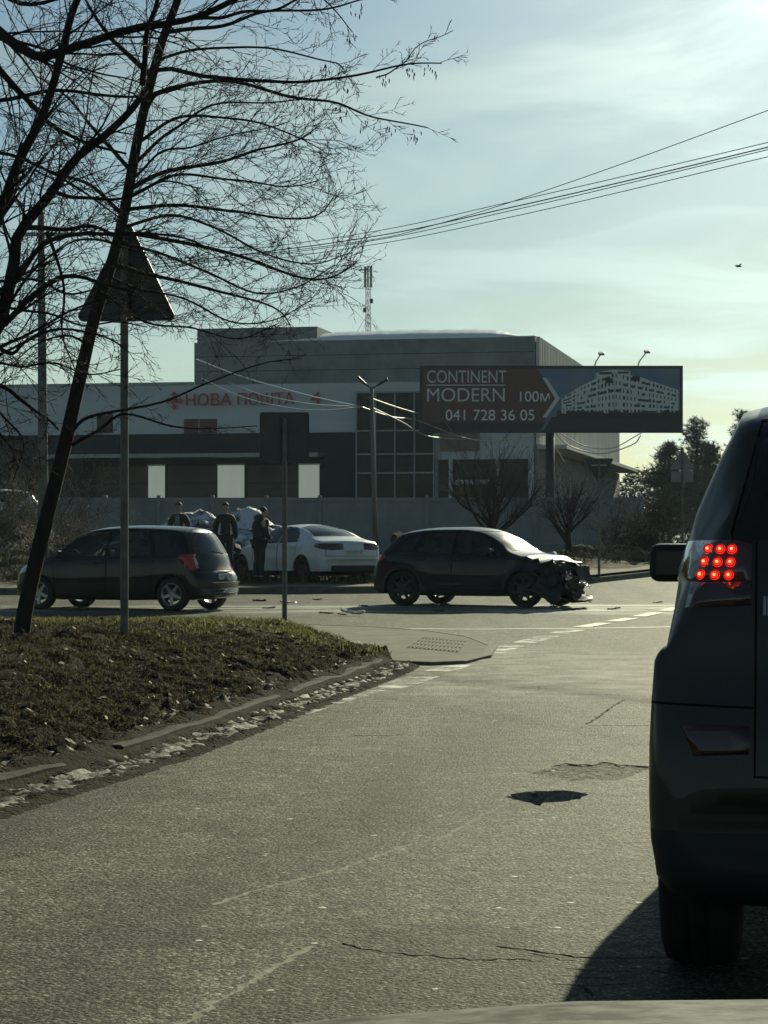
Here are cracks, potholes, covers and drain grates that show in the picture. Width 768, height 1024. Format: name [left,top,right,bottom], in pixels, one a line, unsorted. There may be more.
crack [341,943,688,996]
pothole [506,790,588,806]
